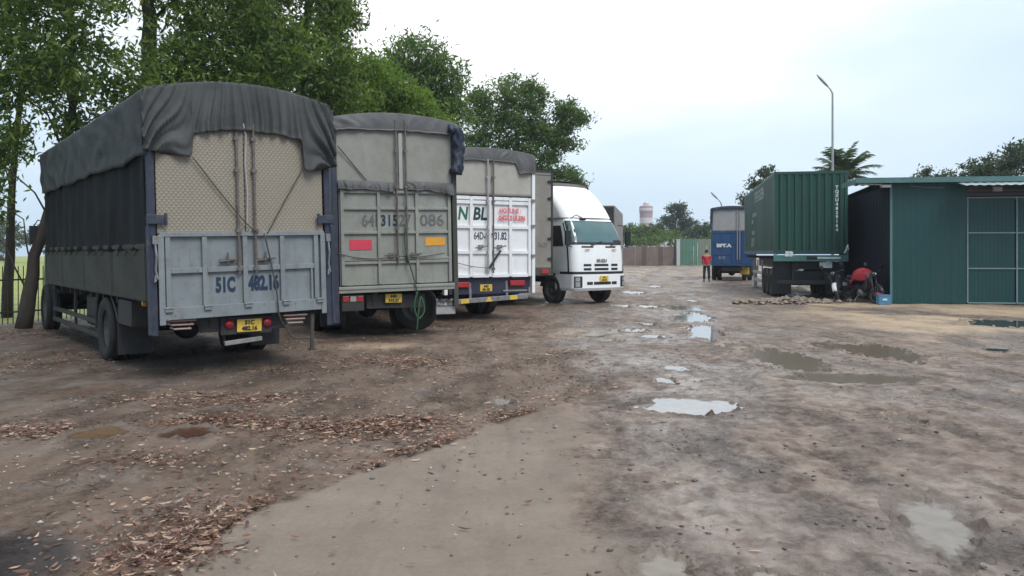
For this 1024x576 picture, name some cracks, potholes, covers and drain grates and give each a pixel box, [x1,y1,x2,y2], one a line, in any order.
pothole [599,394,767,420]
pothole [792,340,948,368]
pothole [752,370,963,387]
pothole [946,318,1024,329]
pothole [679,323,733,347]
pothole [142,423,238,442]
pothole [39,421,148,444]
pothole [729,344,850,372]
pothole [878,486,1003,576]
pothole [662,311,724,324]
